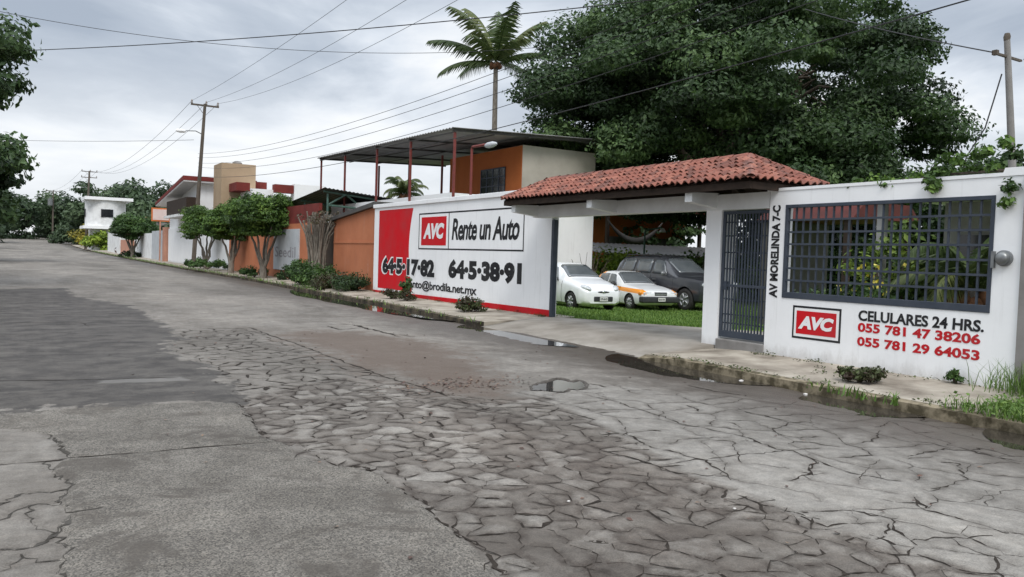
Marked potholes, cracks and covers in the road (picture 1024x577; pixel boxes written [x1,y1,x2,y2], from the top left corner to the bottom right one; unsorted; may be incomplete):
crack [236,379,1024,577]
crack [176,328,402,400]
crack [306,319,413,337]
crack [0,434,102,577]
pothole [530,377,590,392]
